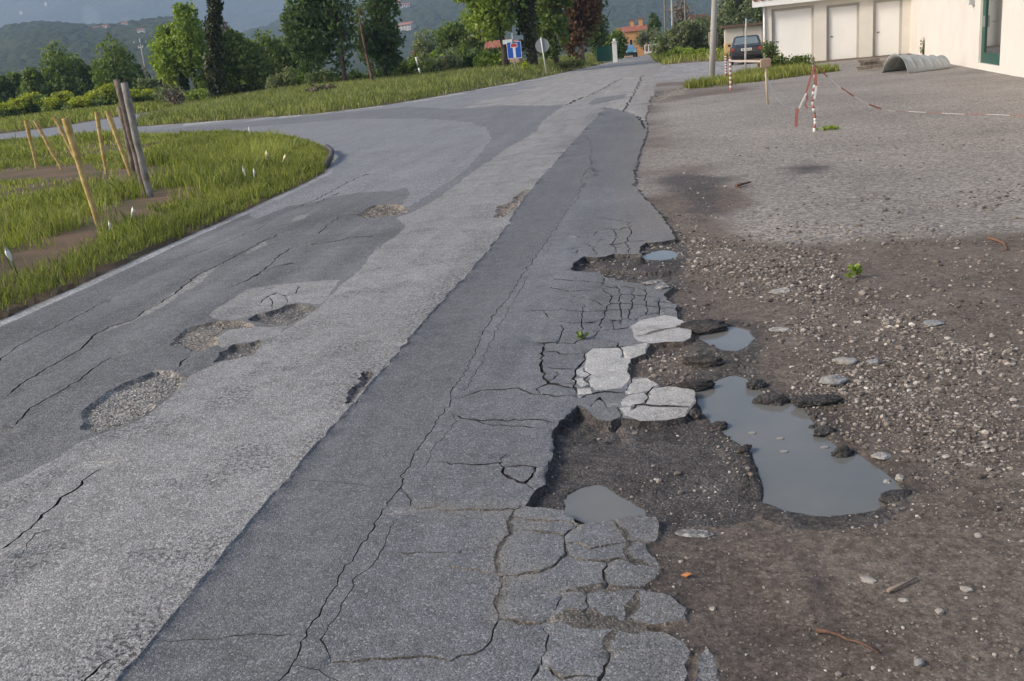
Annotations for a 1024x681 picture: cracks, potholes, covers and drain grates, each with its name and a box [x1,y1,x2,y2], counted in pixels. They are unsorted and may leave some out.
pothole [345,371,374,406]
crack [152,137,657,681]
crack [1,469,100,553]
pothole [248,303,316,327]
pothole [170,320,254,352]
pothole [212,340,261,363]
pothole [356,204,409,218]
pothole [690,330,921,531]
pothole [526,405,761,539]
crack [0,226,299,428]
pothole [80,370,189,432]
pothole [492,189,531,218]
